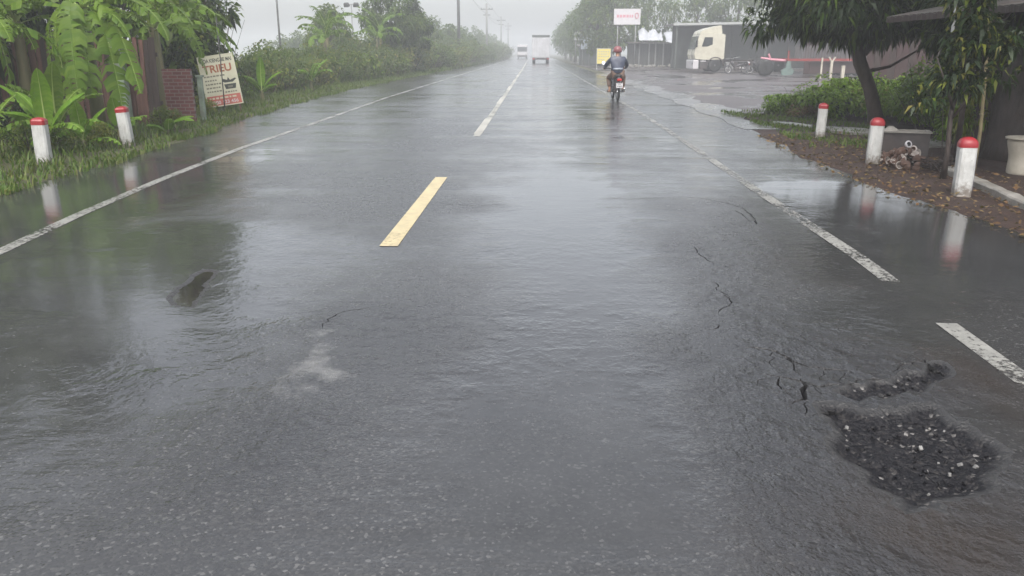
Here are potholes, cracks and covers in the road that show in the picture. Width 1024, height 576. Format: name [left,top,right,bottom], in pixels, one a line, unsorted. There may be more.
pothole [811,400,1015,516]
crack [671,282,733,335]
crack [733,343,944,416]
pothole [831,360,957,402]
pothole [165,269,219,308]
